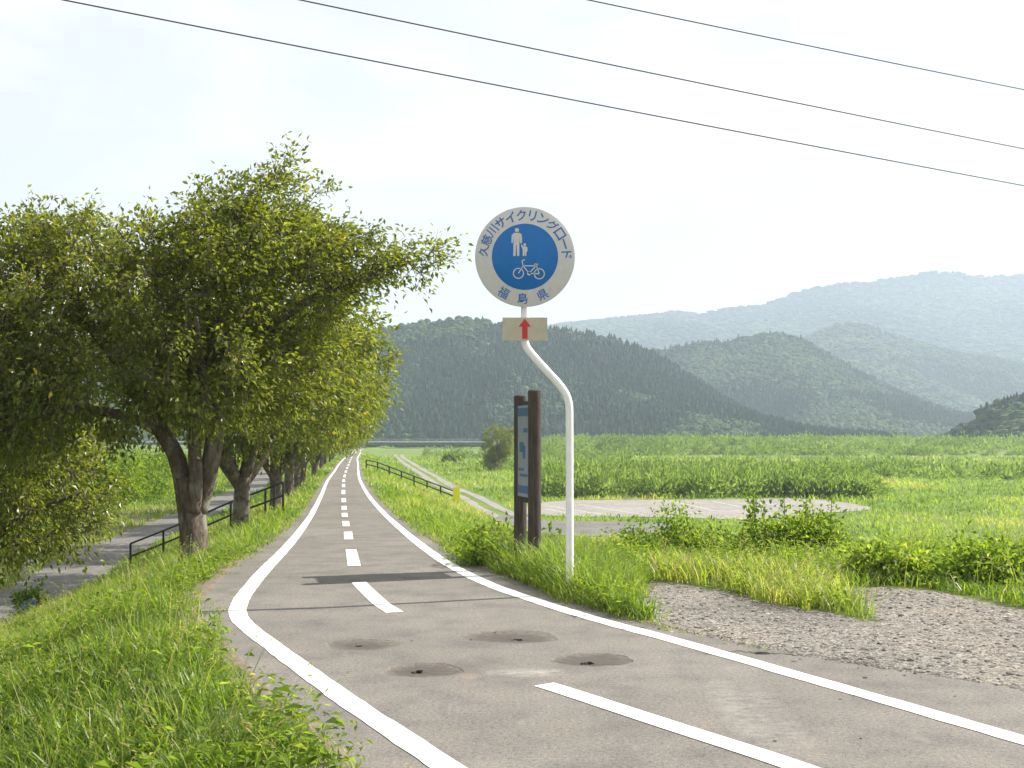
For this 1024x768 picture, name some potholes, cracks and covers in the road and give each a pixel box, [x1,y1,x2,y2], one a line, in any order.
pothole [324,639,404,651]
pothole [548,653,634,667]
pothole [381,663,465,678]
pothole [457,630,558,643]
